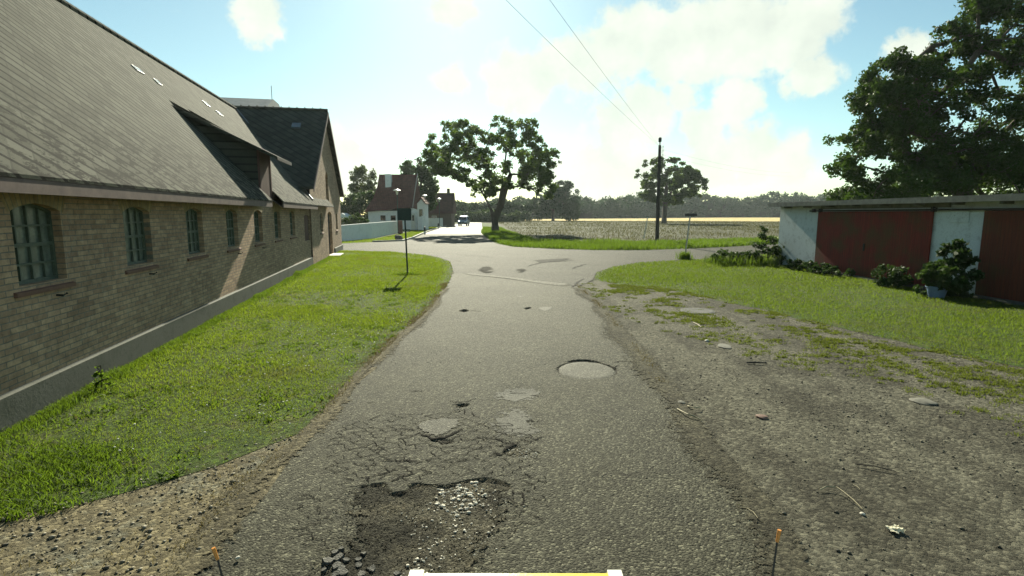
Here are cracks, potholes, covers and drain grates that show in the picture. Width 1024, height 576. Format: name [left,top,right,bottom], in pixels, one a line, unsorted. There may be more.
pothole [317,478,514,576]
crack [325,398,548,547]
manhole cover [557,361,617,379]
